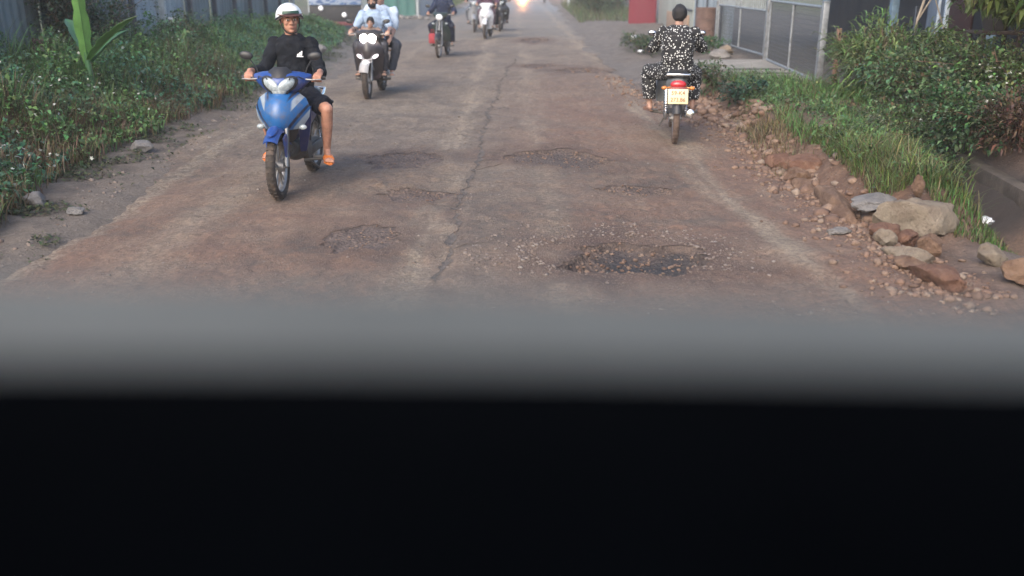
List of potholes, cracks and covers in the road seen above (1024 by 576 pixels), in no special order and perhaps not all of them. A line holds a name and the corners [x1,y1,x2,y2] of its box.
crack [426,59,519,282]
pothole [375,188,461,202]
pothole [319,224,404,254]
pothole [593,185,674,196]
pothole [501,148,618,169]
pothole [556,242,712,277]
pothole [365,152,444,170]
